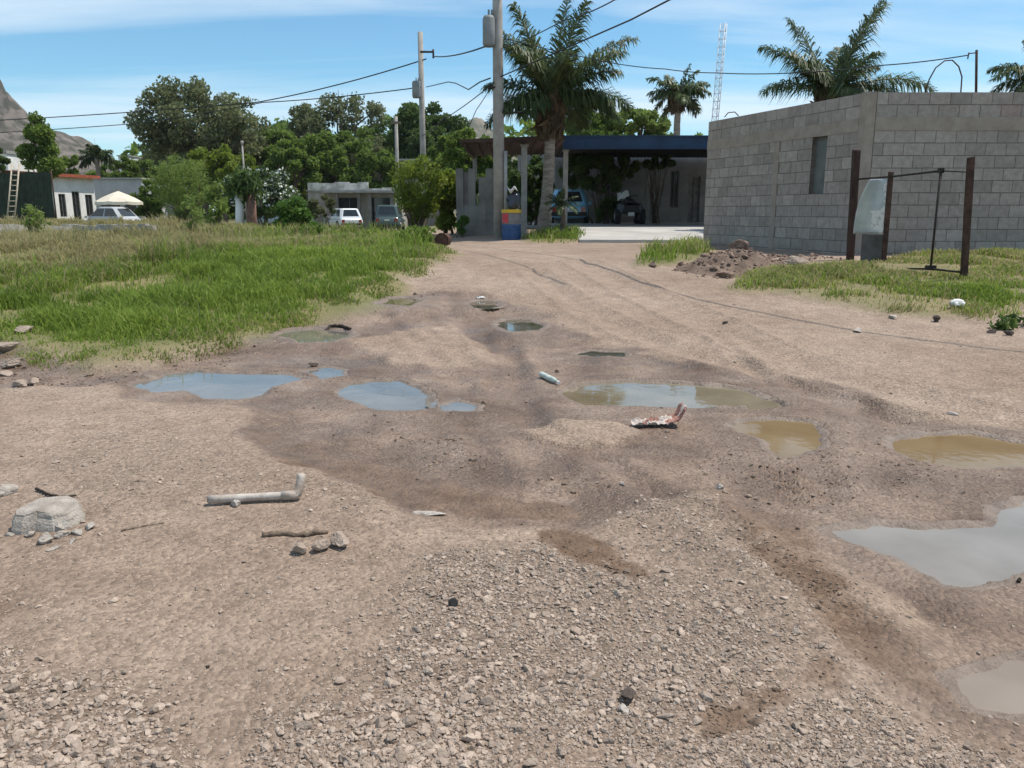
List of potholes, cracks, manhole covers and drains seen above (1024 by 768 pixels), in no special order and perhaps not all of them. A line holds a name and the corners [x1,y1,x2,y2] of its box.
pothole [333,378,440,411]
pothole [557,378,790,410]
pothole [425,398,485,412]
pothole [934,650,1024,724]
pothole [126,369,312,400]
pothole [490,317,552,333]
pothole [462,299,508,311]
pothole [817,495,1024,591]
pothole [723,415,831,458]
pothole [571,349,632,357]
pothole [268,325,360,344]
pothole [371,296,427,307]
